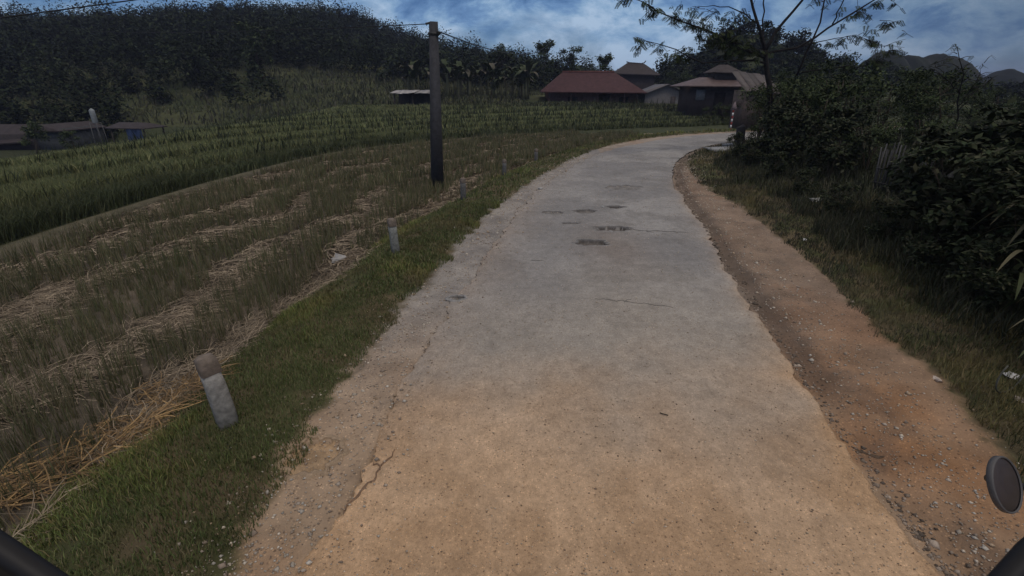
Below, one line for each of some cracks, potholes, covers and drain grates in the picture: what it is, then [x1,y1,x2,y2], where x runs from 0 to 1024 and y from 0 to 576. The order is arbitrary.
crack [343,449,395,515]
pothole [569,238,611,246]
pothole [445,294,468,302]
